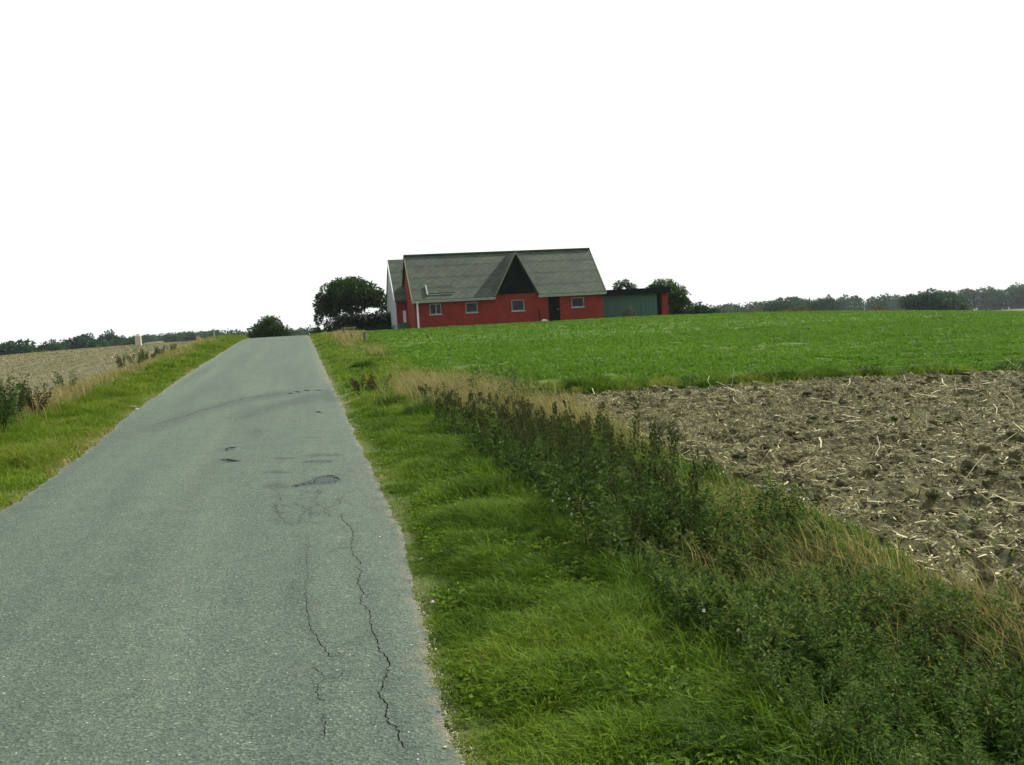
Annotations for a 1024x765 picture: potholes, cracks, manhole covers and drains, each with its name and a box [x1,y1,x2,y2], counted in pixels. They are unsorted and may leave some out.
pothole [293,475,339,487]
crack [274,489,408,750]
